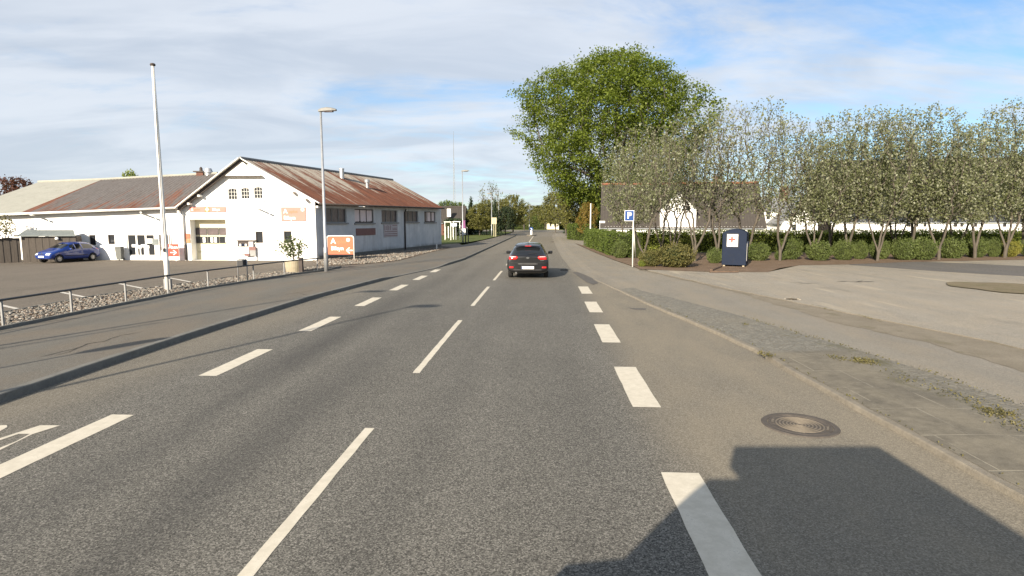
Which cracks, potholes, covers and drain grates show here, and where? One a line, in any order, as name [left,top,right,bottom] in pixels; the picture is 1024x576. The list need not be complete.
manhole cover [761,413,841,438]
